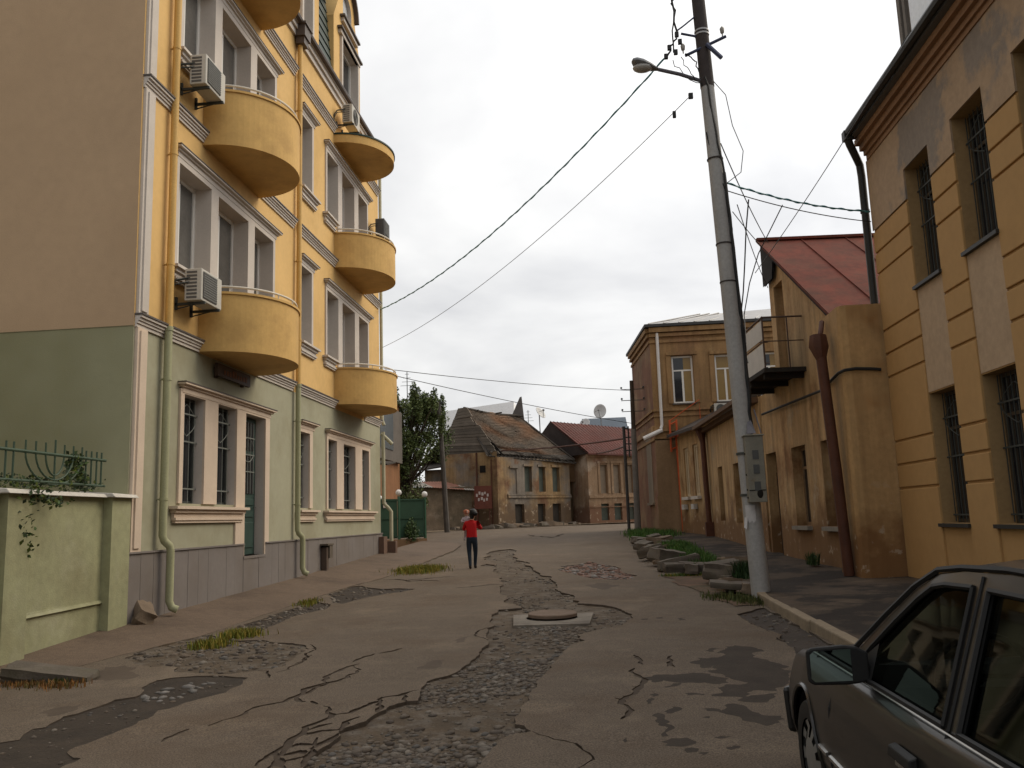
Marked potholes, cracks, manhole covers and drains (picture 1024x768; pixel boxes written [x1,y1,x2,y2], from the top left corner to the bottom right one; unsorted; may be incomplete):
manhole cover [513,609,594,628]
pothole [737,608,833,654]
crack [161,644,415,768]
pothole [303,549,633,768]
pothole [234,603,331,631]
pothole [125,635,308,674]
crack [616,655,649,719]
pothole [0,675,247,768]
